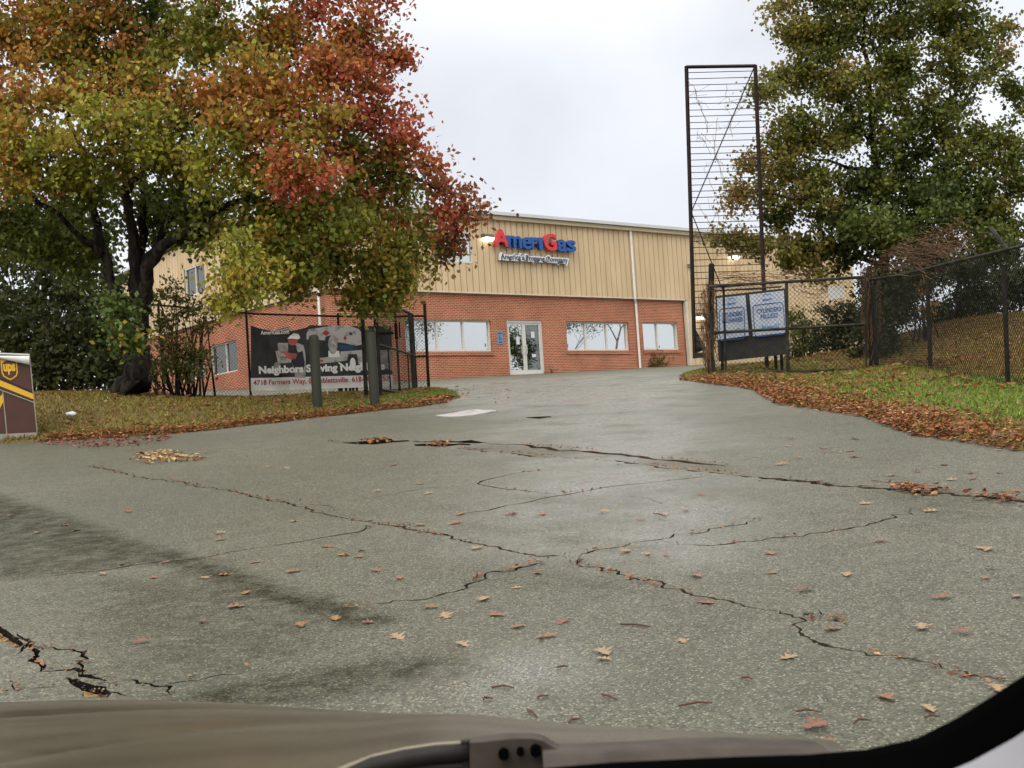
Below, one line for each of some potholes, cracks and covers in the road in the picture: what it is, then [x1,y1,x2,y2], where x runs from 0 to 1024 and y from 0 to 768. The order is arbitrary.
crack [11,633,254,696]
crack [463,469,704,514]
crack [86,466,565,609]
crack [574,510,1010,682]
